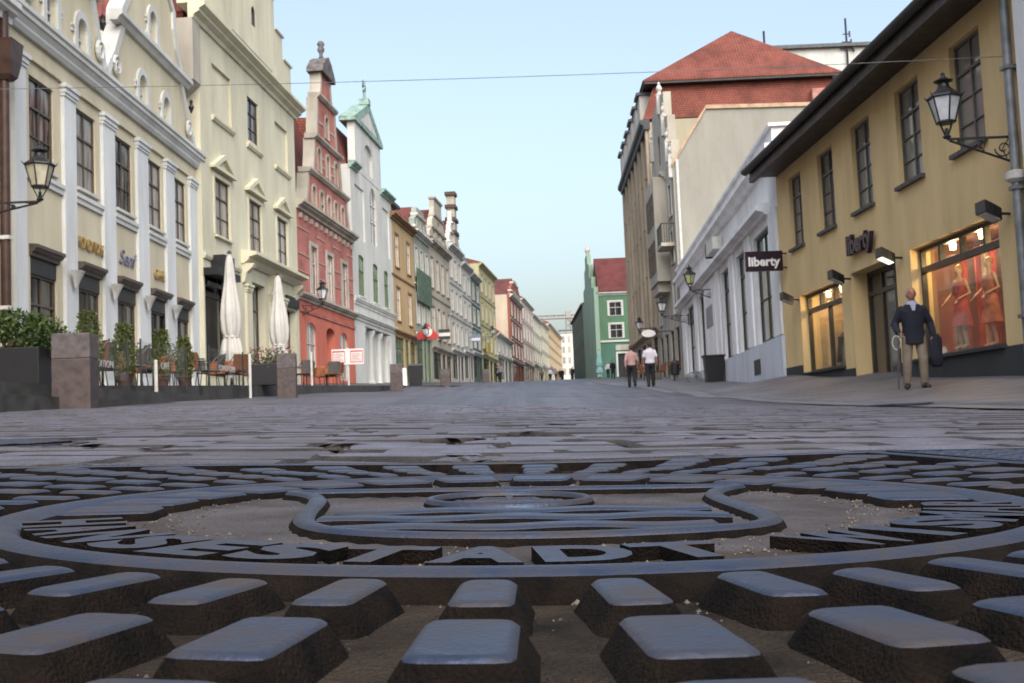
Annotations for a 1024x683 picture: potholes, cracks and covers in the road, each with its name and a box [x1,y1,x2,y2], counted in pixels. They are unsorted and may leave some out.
manhole cover [0,451,1024,683]
